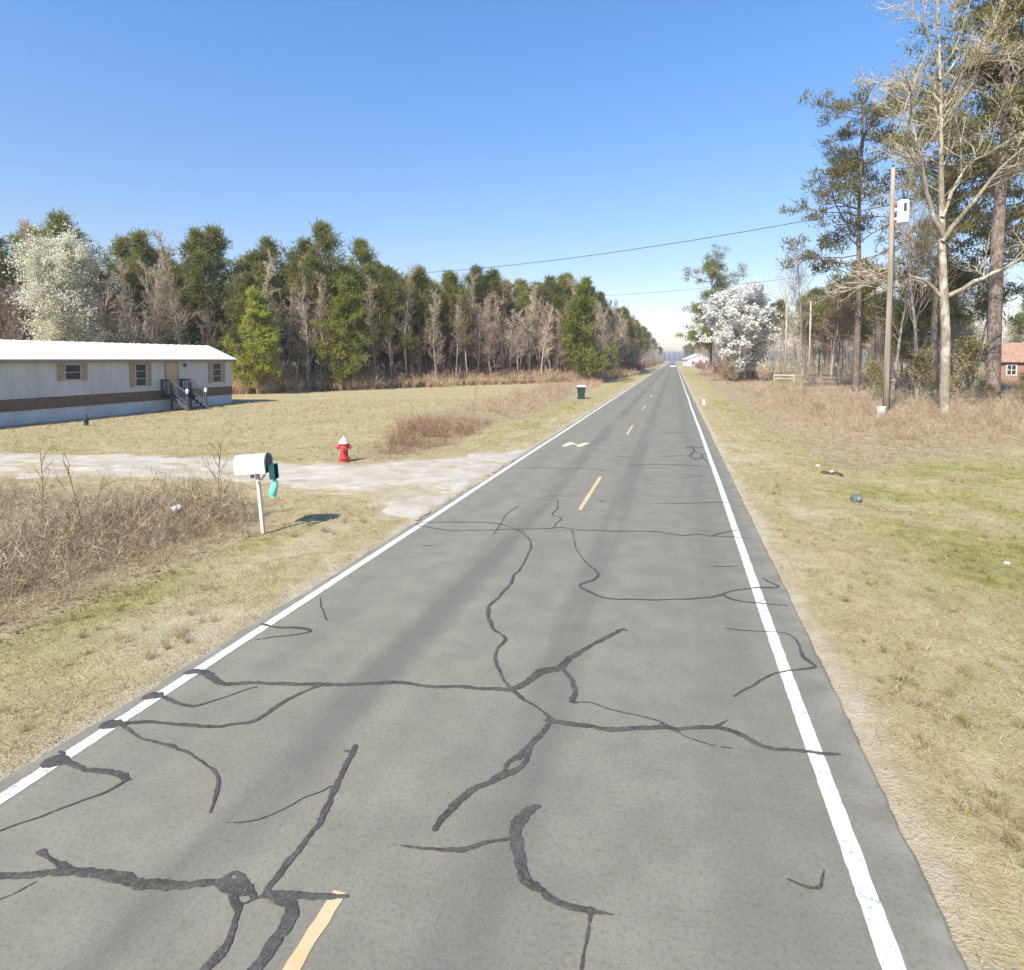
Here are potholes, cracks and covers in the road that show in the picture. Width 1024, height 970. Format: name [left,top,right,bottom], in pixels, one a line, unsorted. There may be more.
crack [532,432,715,477]
crack [98,499,841,831]
crack [786,870,825,889]
